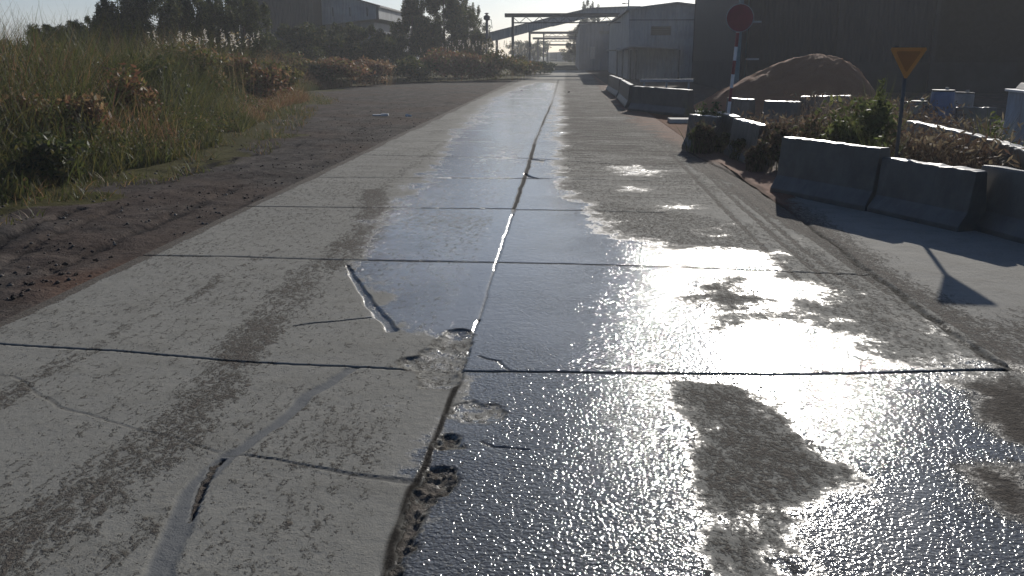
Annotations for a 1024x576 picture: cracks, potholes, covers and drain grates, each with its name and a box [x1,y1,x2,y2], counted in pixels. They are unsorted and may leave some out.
pothole [381,464,464,576]
pothole [426,432,469,452]
crack [479,440,531,450]
pothole [442,399,510,425]
pothole [394,328,478,391]
crack [0,366,420,576]
crack [293,265,400,333]
crack [523,159,544,179]
